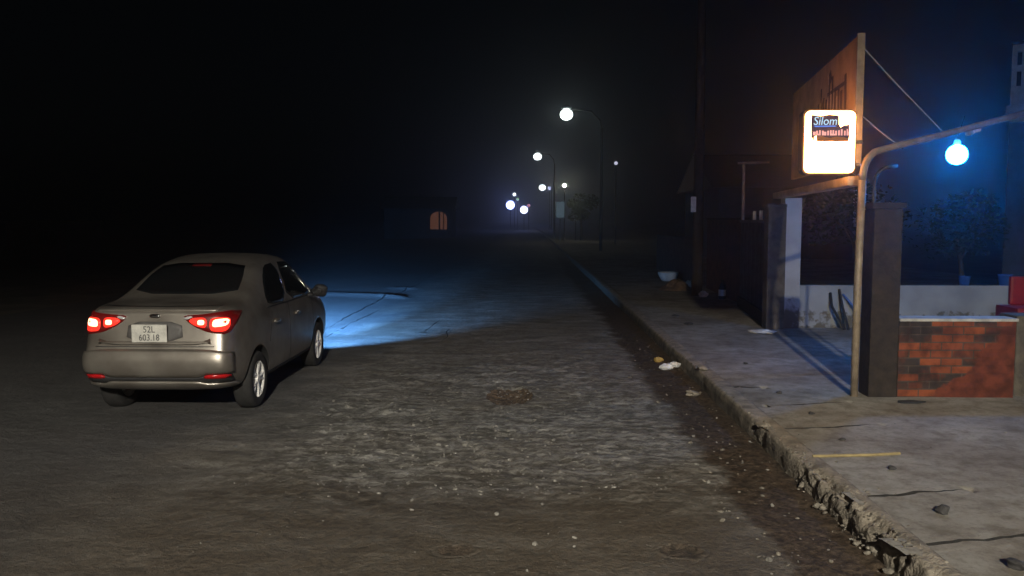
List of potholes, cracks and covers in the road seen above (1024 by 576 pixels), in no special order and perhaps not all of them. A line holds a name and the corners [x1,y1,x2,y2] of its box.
crack [323,281,463,342]
pothole [652,542,711,561]
pothole [431,543,482,558]
pothole [477,381,542,409]
